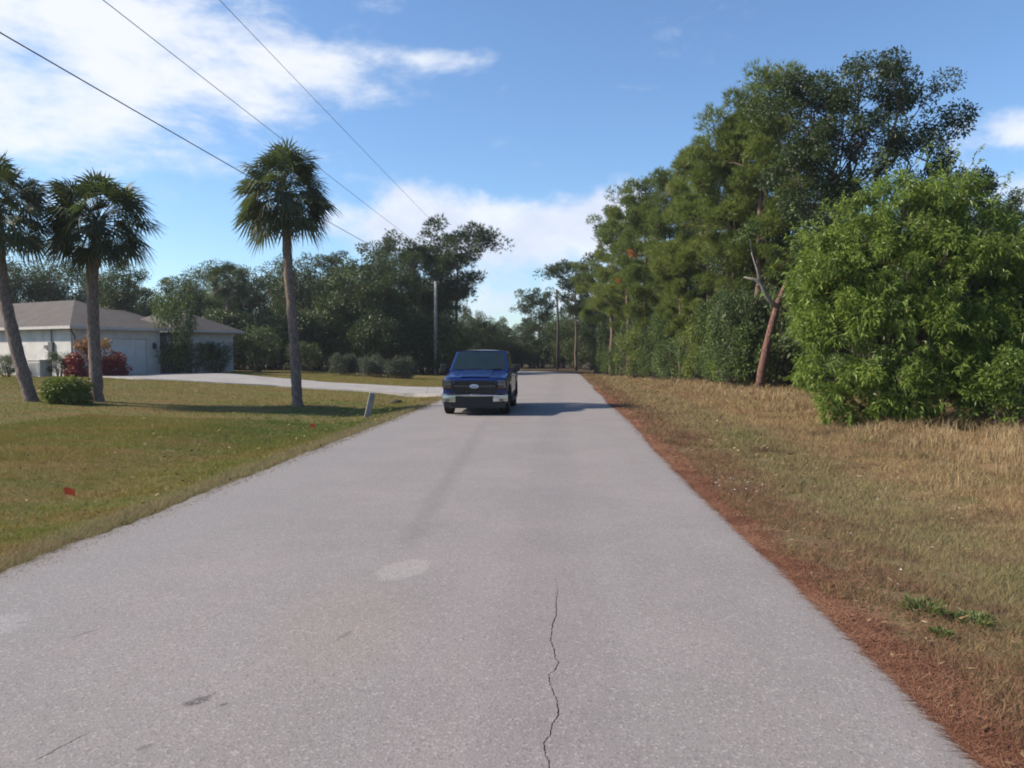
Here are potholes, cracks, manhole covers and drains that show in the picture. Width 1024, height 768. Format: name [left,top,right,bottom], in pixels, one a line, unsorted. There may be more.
crack [543,577,559,768]
